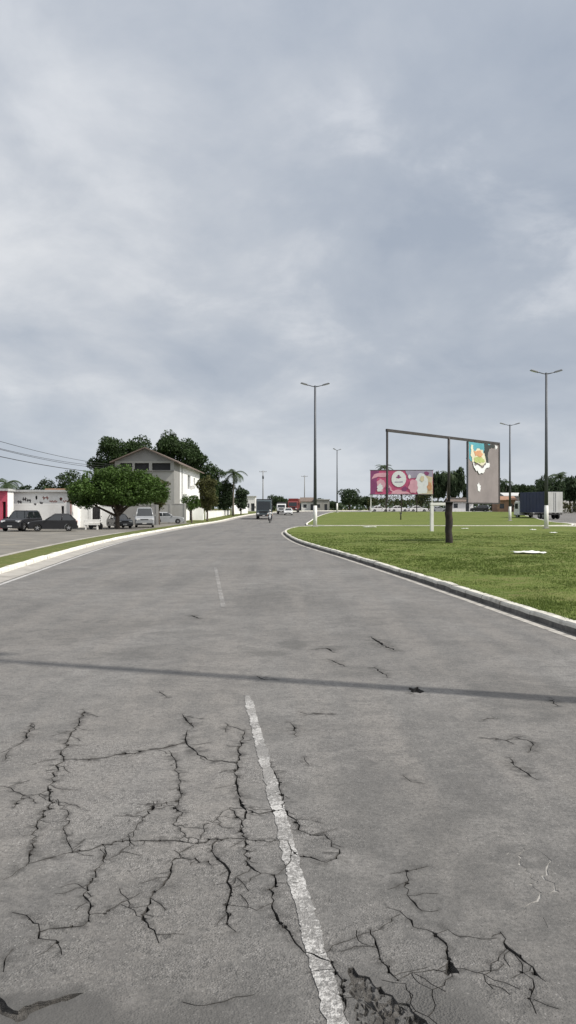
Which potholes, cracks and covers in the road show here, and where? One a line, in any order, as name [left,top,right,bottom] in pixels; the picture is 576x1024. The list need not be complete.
pothole [347,967,428,1024]
crack [3,711,559,1024]
